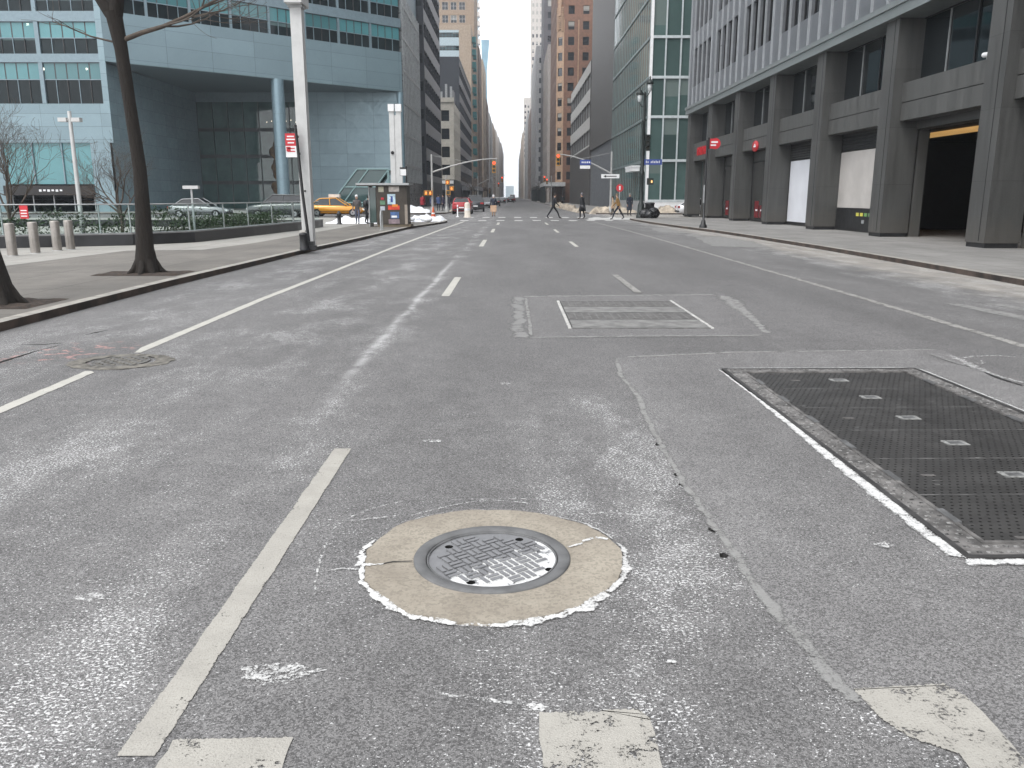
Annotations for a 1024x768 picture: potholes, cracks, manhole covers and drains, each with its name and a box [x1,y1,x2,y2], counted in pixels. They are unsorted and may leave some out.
manhole cover [356,509,633,627]
crack [312,498,659,704]
manhole cover [65,354,175,370]
